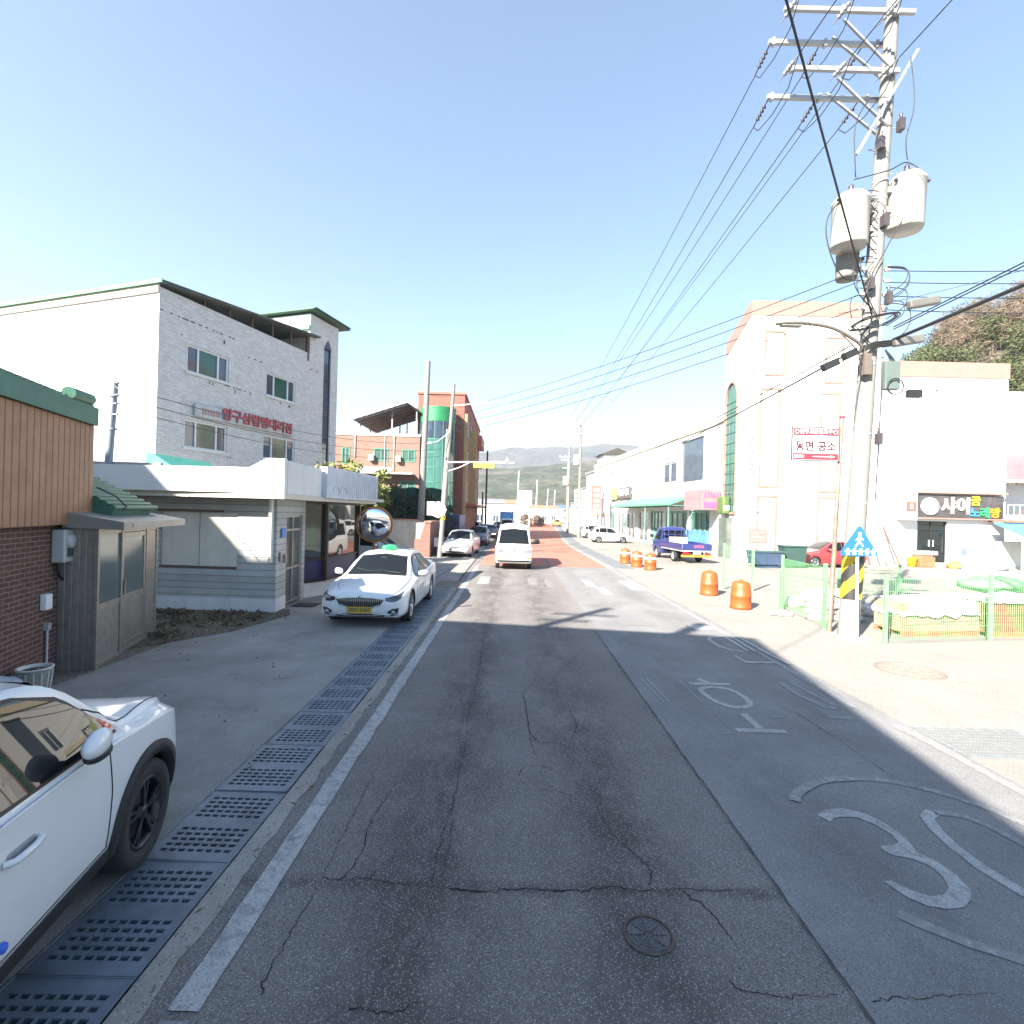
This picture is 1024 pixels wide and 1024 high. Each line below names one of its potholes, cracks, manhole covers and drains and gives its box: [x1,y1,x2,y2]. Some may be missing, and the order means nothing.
manhole cover [623,914,675,956]
drain grate [363,639,410,654]
crack [729,980,840,1000]
crack [322,626,761,952]
drain grate [17,860,231,980]
drain grate [0,975,137,1024]
drain grate [266,711,352,747]
drain grate [327,667,387,689]
drain grate [145,790,287,862]
crack [261,759,395,995]
drain grate [214,743,324,793]
manhole cover [873,662,948,680]
